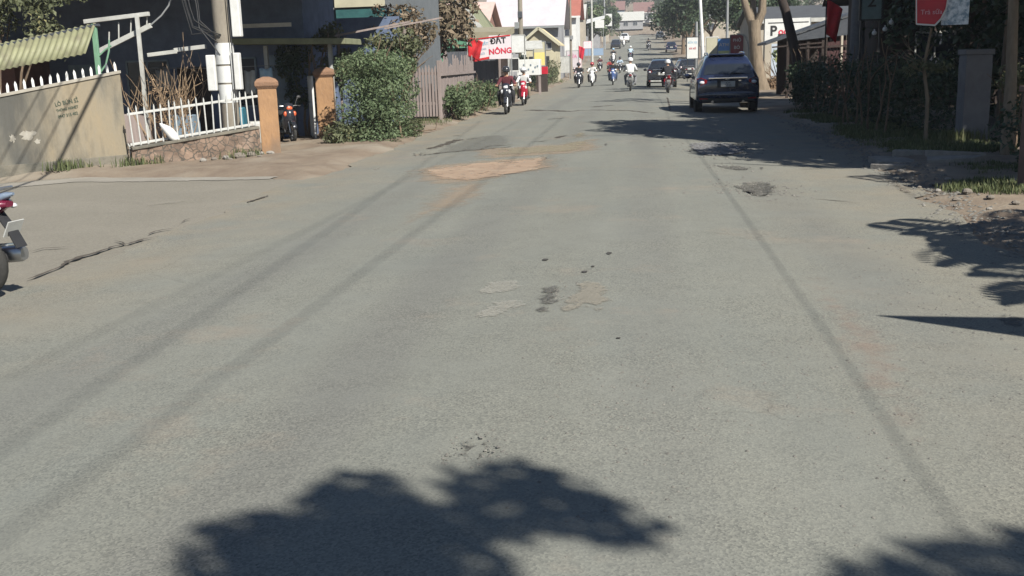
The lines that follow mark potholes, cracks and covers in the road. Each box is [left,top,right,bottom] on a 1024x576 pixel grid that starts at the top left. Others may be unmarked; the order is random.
pothole [729,181,775,196]
crack [28,219,187,279]
